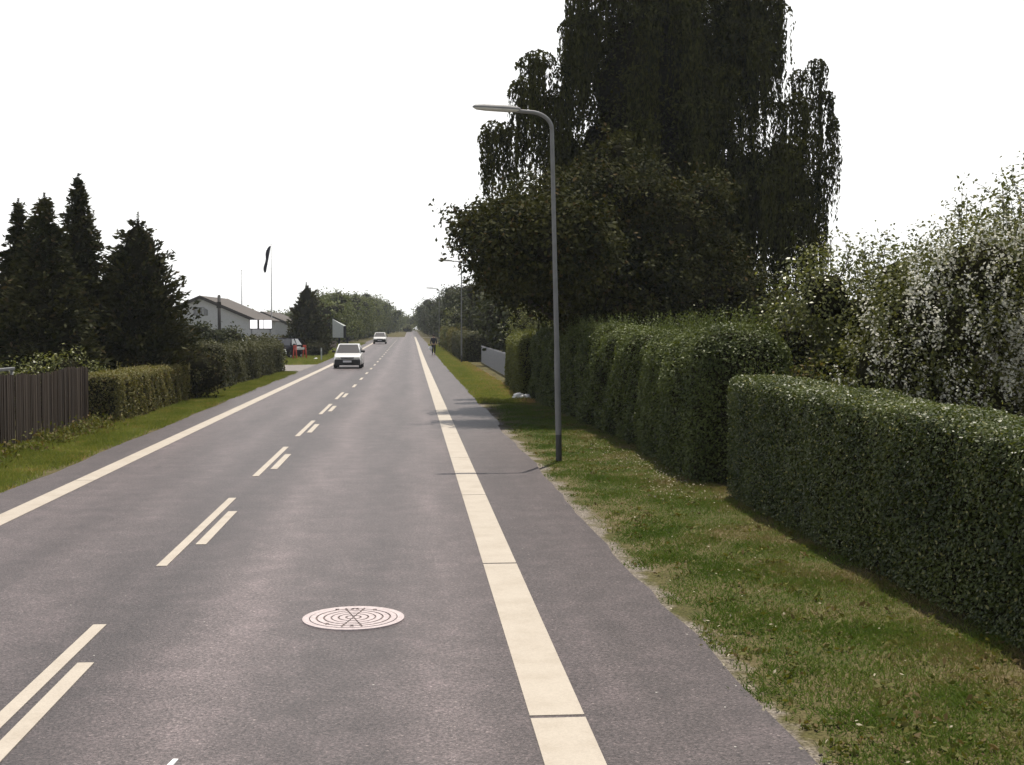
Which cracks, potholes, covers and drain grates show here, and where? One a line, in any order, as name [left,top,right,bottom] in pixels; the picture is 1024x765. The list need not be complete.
manhole cover [302,606,404,631]
